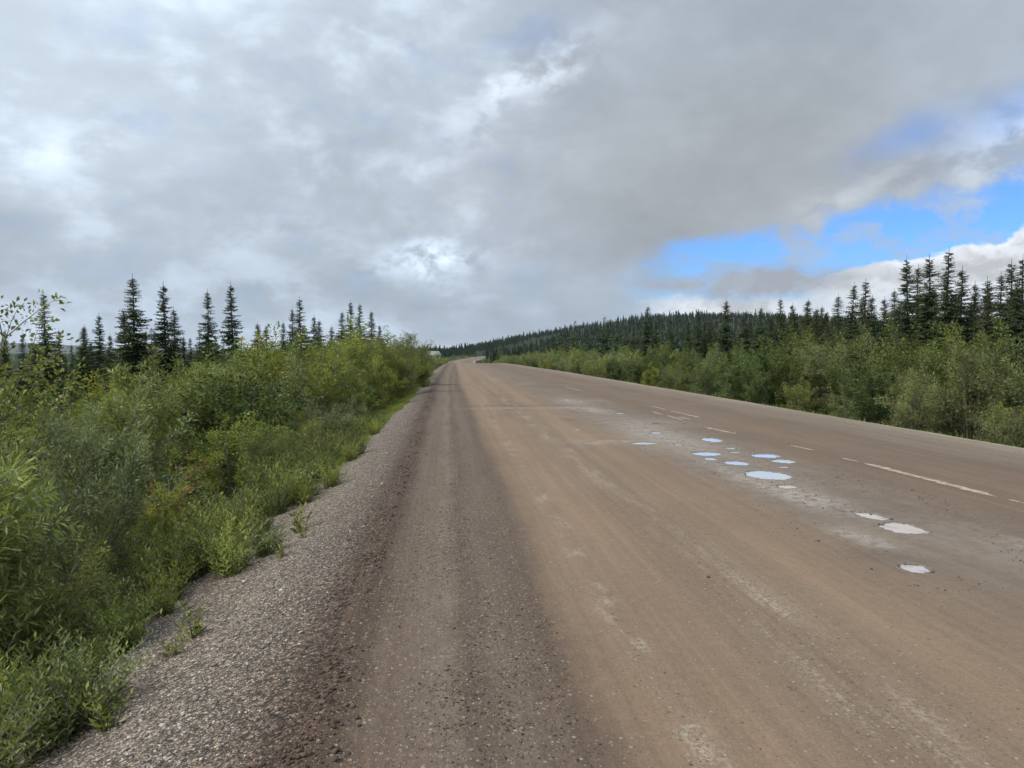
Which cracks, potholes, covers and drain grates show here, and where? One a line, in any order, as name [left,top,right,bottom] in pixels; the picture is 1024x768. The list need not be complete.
pothole [896,563,937,574]
pothole [873,521,934,534]
pothole [743,470,795,480]
pothole [851,511,895,521]
